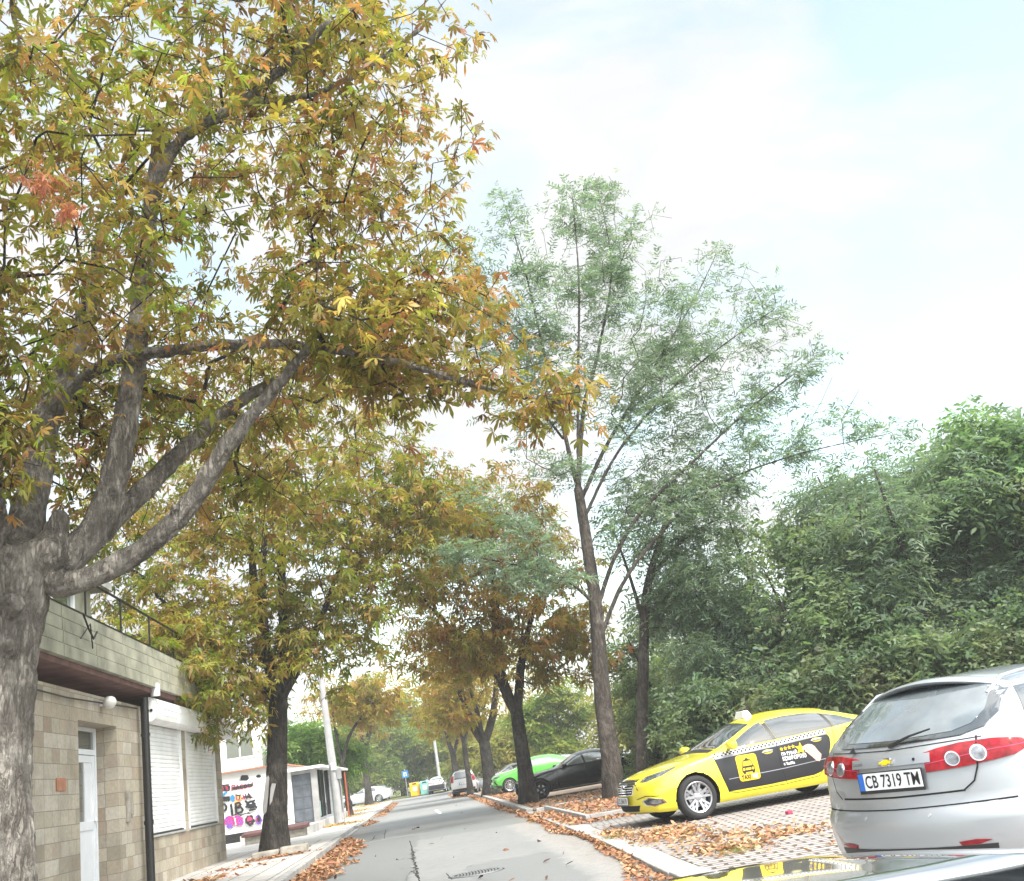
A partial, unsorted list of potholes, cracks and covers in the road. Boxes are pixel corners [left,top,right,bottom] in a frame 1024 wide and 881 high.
crack [396,841,420,881]
